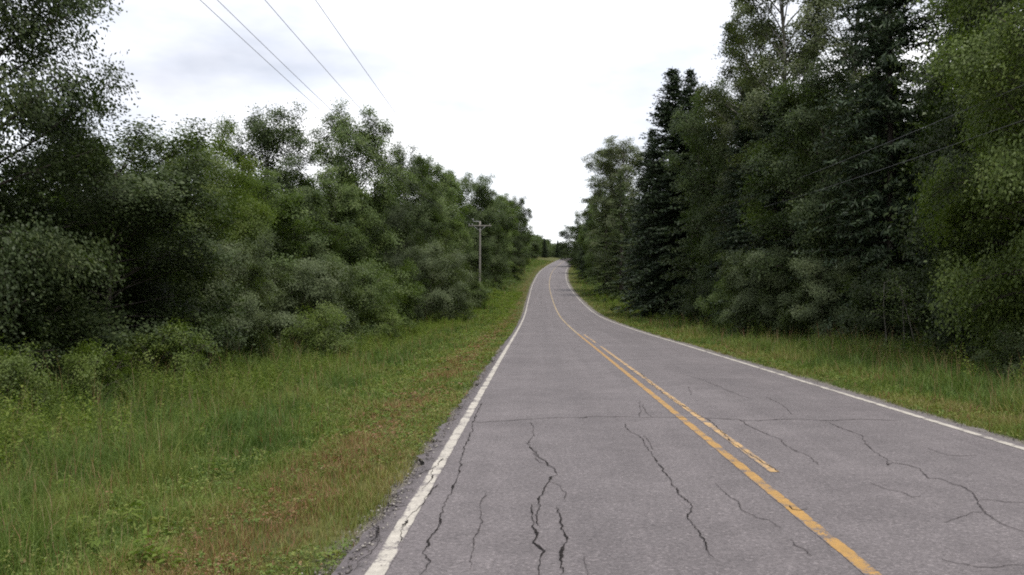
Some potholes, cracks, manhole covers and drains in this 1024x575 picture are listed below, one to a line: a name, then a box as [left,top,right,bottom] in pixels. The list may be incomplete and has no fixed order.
crack [355,397,1024,575]
